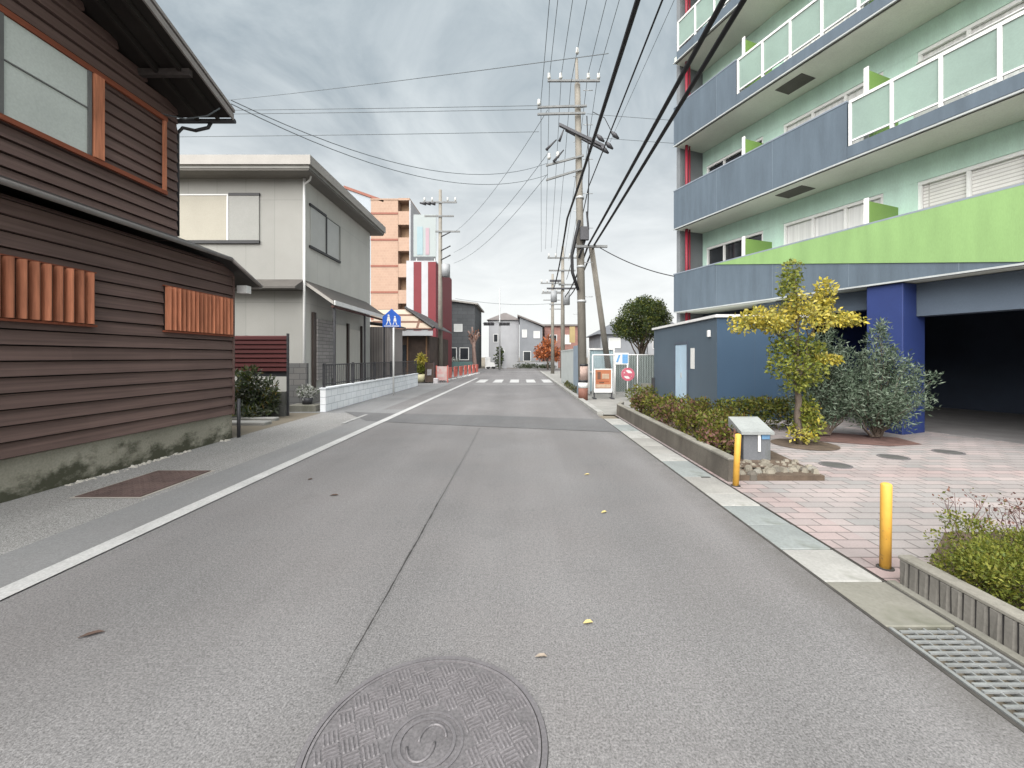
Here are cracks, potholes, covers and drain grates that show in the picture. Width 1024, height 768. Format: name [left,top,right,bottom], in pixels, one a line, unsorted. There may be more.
drain grate [889,627,1024,728]
manhole cover [294,656,549,768]
manhole cover [818,461,853,469]
